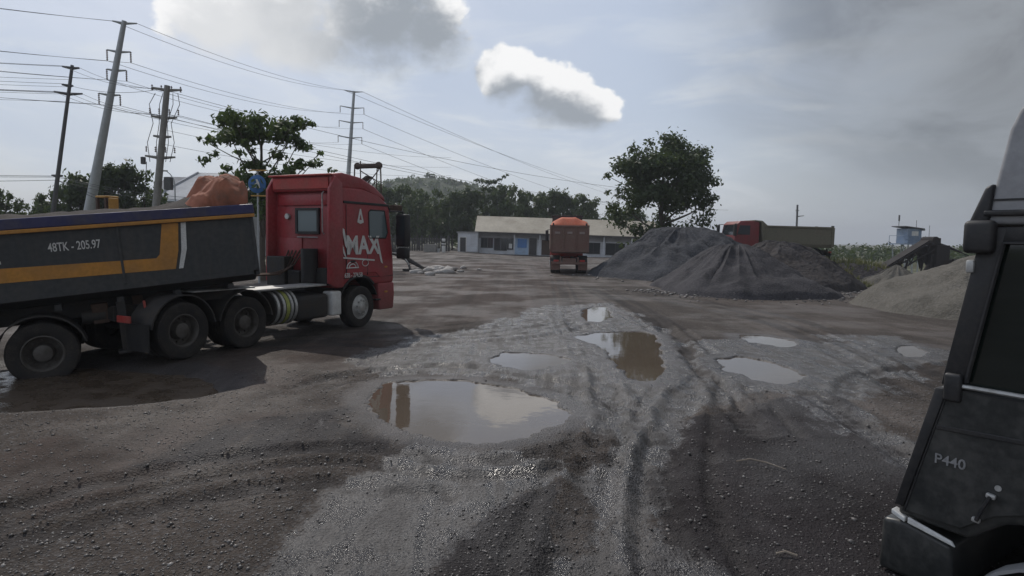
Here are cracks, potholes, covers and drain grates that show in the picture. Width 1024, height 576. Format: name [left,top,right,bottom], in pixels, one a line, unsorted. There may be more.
pothole [572,332,666,382]
pothole [367,379,571,444]
pothole [897,346,928,357]
pothole [488,352,572,370]
pothole [739,335,797,347]
pothole [581,307,613,322]
pothole [716,357,807,384]
